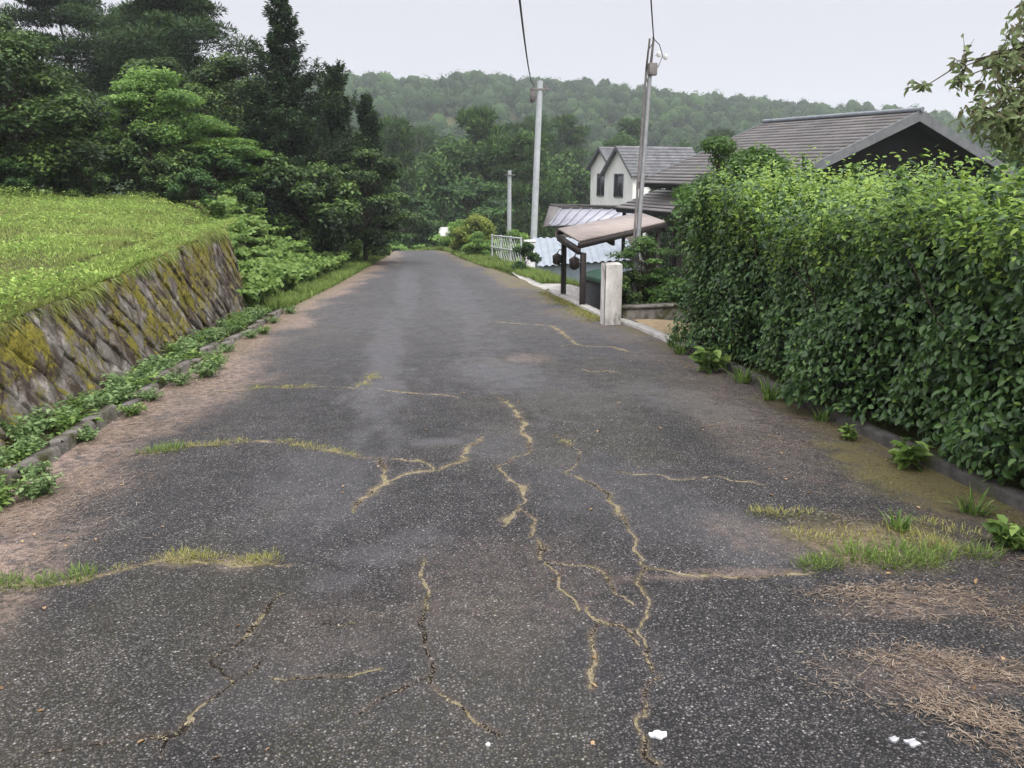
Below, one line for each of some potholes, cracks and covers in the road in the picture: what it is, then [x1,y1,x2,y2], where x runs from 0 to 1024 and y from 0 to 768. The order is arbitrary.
crack [215,375,458,398]
crack [494,398,815,766]
crack [14,559,502,768]
crack [488,321,628,352]
crack [129,437,482,513]
